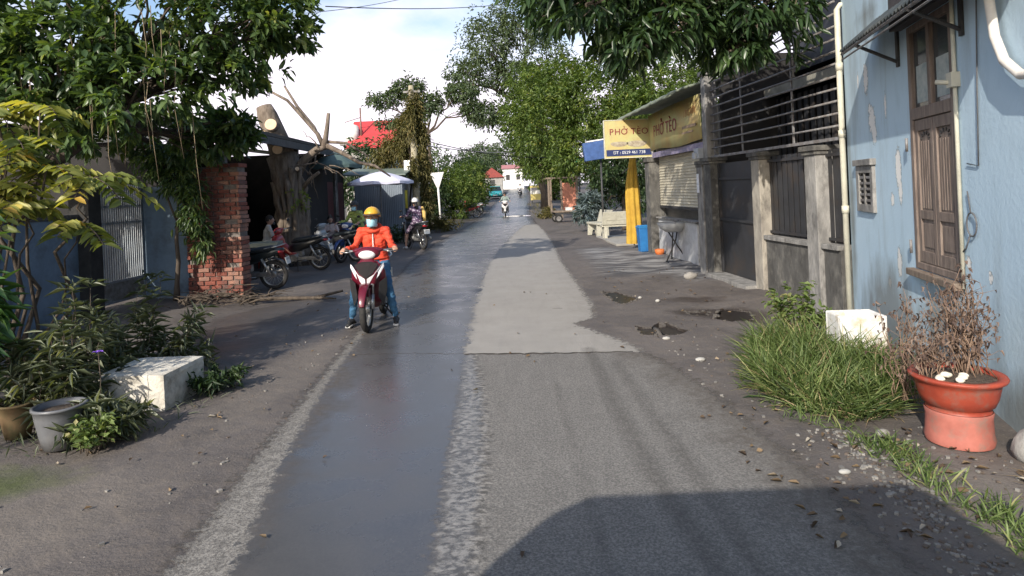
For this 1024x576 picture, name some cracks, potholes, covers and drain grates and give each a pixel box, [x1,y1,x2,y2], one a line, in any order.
pothole [600,290,640,304]
pothole [712,309,755,322]
pothole [634,322,692,336]
